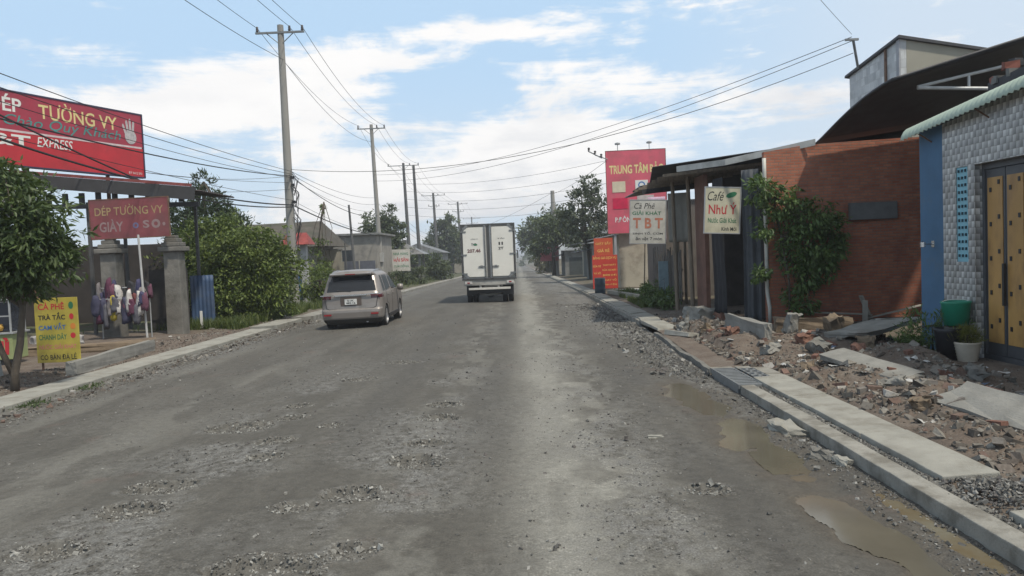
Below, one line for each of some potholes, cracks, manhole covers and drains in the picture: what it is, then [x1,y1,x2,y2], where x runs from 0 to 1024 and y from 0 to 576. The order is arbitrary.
pothole [323,484,391,504]
pothole [89,499,180,523]
pothole [323,539,388,561]
pothole [245,451,291,462]
pothole [426,400,465,408]
pothole [203,551,331,576]
pothole [683,478,734,496]
pothole [266,499,322,514]
pothole [204,419,275,434]
drain grate [710,366,784,393]
pothole [254,435,301,446]
pothole [1,538,98,564]
